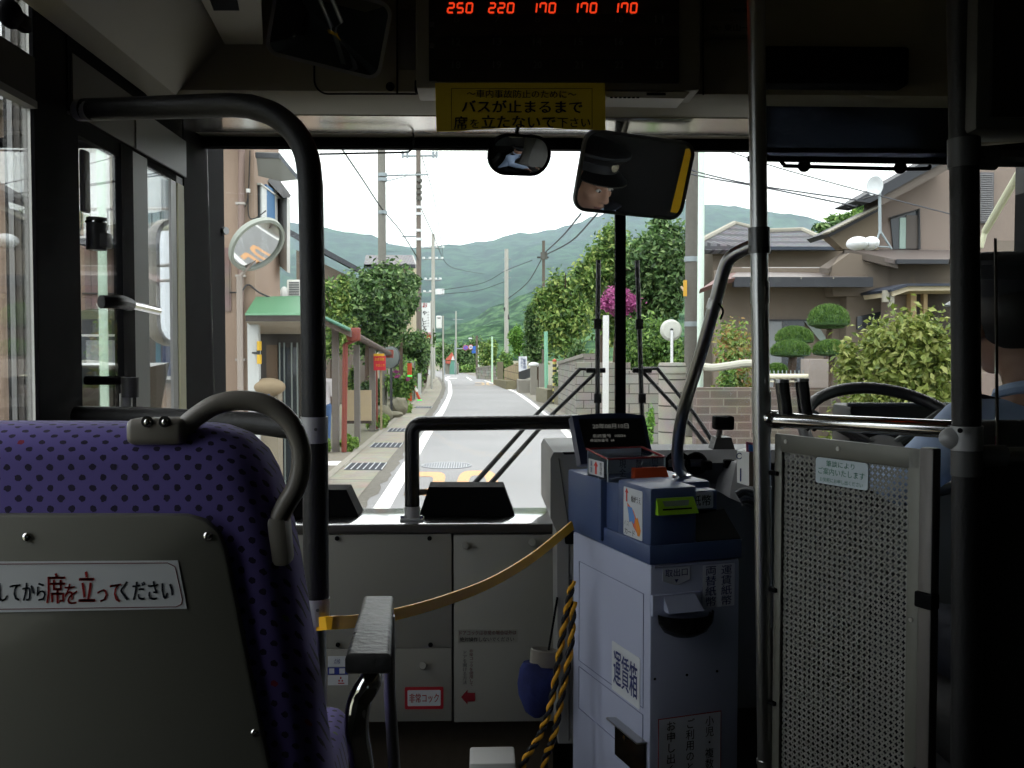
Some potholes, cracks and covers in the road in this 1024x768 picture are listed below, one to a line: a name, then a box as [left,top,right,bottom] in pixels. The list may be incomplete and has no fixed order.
drain grate [344,462,387,470]
